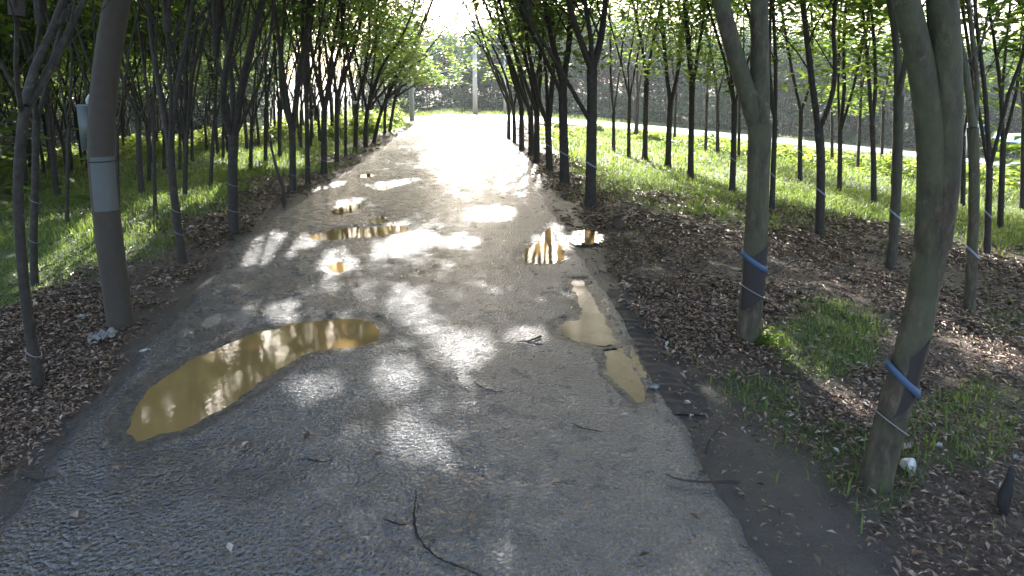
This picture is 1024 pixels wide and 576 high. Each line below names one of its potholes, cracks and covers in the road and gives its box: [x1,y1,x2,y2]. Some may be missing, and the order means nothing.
pothole [594,344,656,407]
pothole [105,313,394,450]
pothole [548,277,631,351]
pothole [298,223,415,241]
pothole [515,225,574,265]
